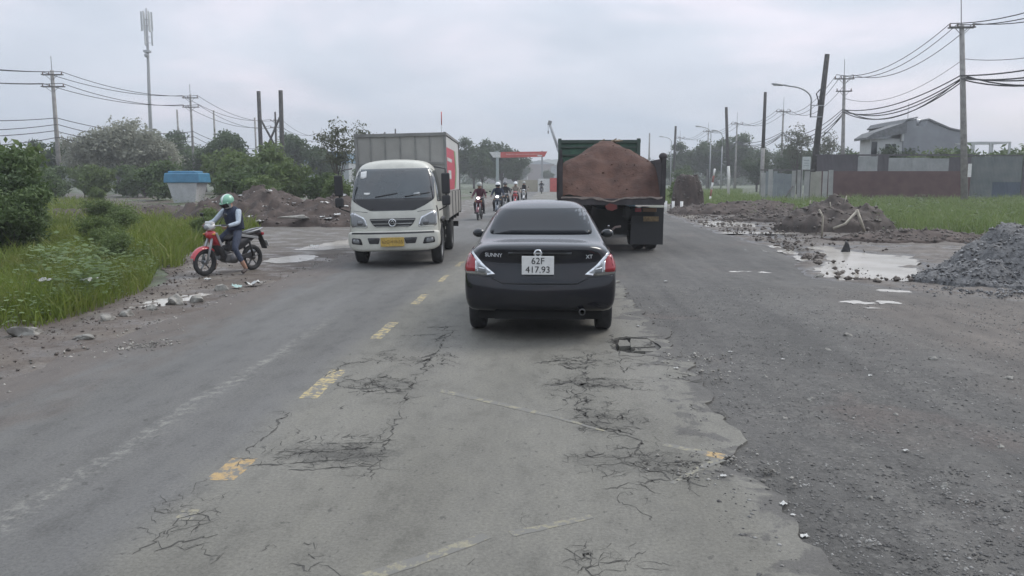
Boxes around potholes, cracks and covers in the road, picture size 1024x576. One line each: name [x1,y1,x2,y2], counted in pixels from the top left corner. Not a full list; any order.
crack [559,536,672,575]
pothole [612,338,657,354]
crack [228,326,459,480]
crack [114,478,228,564]
crack [534,334,713,521]
